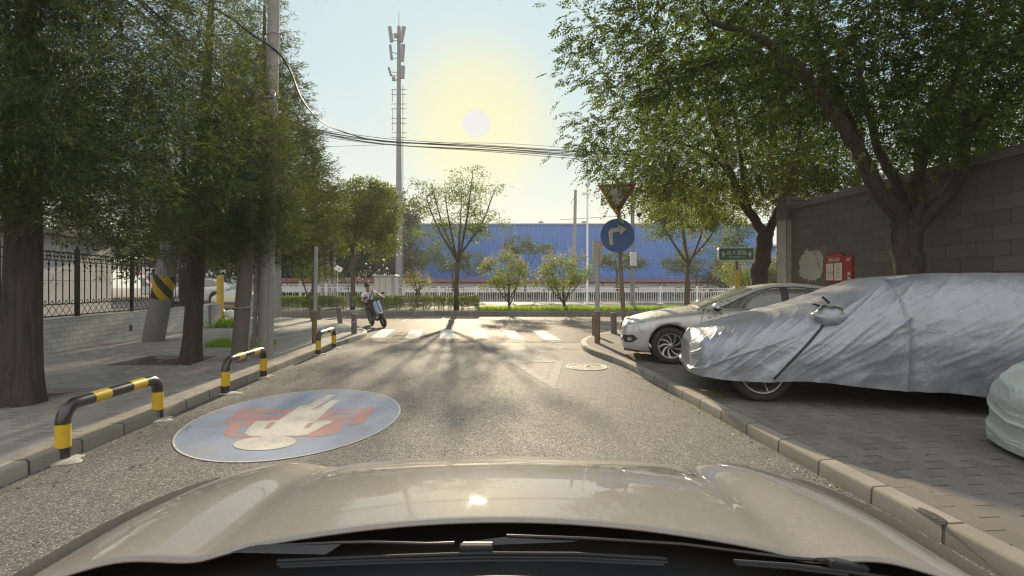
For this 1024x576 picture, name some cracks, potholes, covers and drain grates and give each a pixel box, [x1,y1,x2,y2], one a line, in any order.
manhole cover [566,363,608,371]
